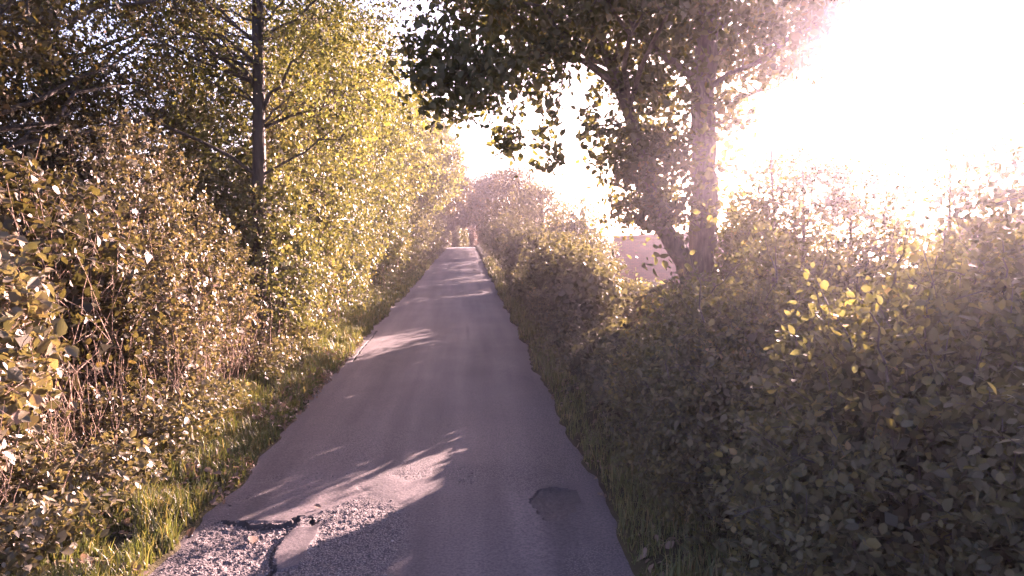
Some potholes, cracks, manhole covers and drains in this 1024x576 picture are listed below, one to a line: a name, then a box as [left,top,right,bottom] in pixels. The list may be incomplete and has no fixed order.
pothole [529,487,583,522]
crack [210,515,321,576]
